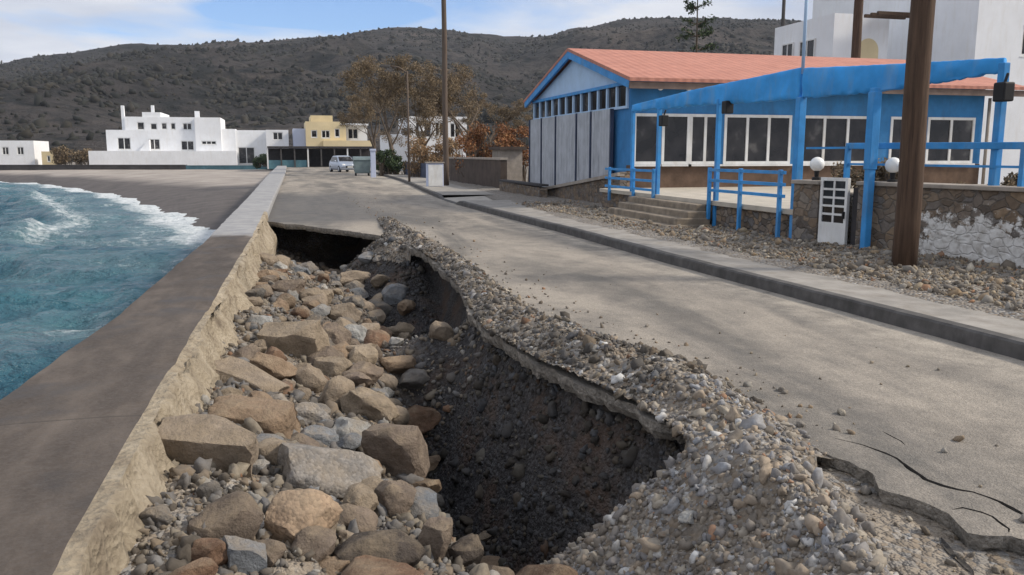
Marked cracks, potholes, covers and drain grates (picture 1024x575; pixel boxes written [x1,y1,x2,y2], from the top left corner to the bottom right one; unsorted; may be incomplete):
pothole [118,226,1024,575]
crack [835,432,1024,575]
